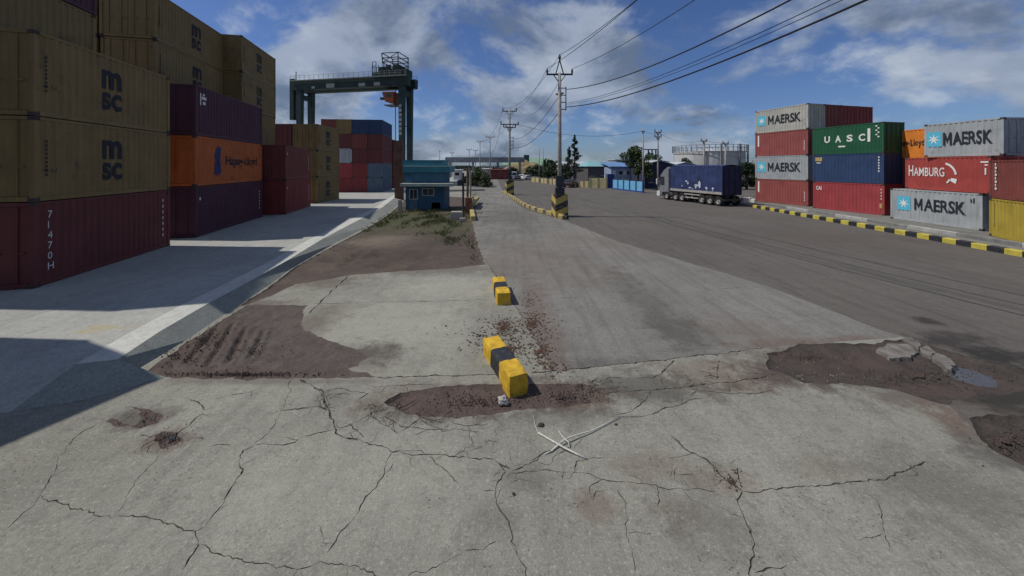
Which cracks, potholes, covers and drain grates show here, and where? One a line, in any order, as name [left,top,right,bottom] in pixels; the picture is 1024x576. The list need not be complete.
pothole [106,407,164,429]
pothole [766,339,1024,405]
crack [574,360,773,418]
pothole [384,384,595,419]
pothole [154,431,183,449]
pothole [148,304,375,381]
crack [8,373,925,576]
